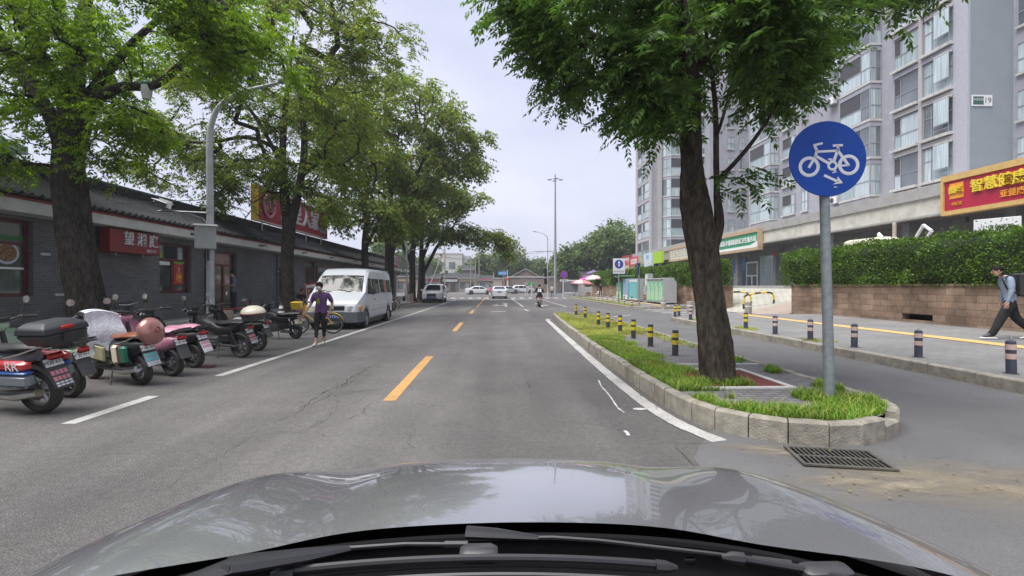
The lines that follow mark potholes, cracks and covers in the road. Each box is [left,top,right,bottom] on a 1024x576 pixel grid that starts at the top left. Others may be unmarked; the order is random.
crack [151,346,408,495]
drain grate [783,445,900,472]
